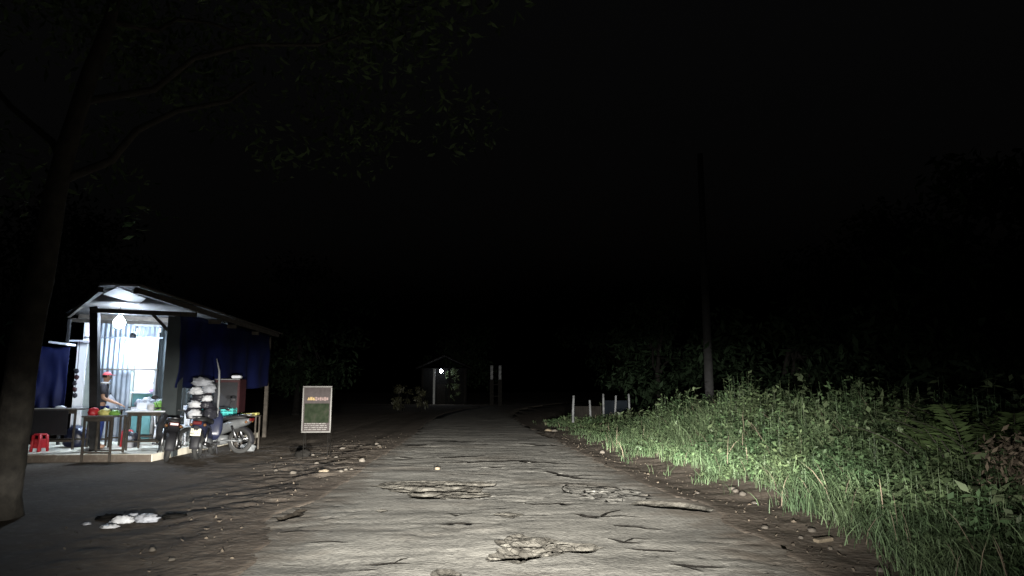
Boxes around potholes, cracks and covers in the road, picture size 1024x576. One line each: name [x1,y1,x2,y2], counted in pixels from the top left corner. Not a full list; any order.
pothole [629,501,715,513]
crack [400,439,726,572]
pothole [485,533,606,564]
pothole [371,481,497,500]
